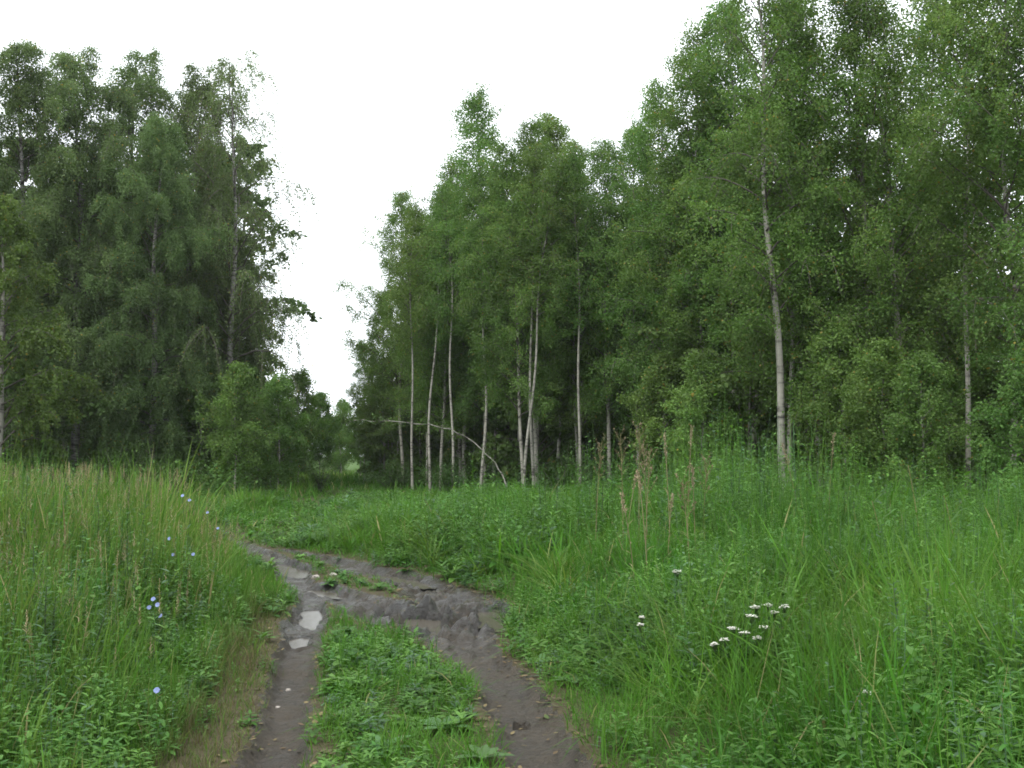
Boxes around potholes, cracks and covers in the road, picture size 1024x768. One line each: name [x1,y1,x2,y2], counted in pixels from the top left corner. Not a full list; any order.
pothole [283,633,315,649]
pothole [293,603,327,630]
